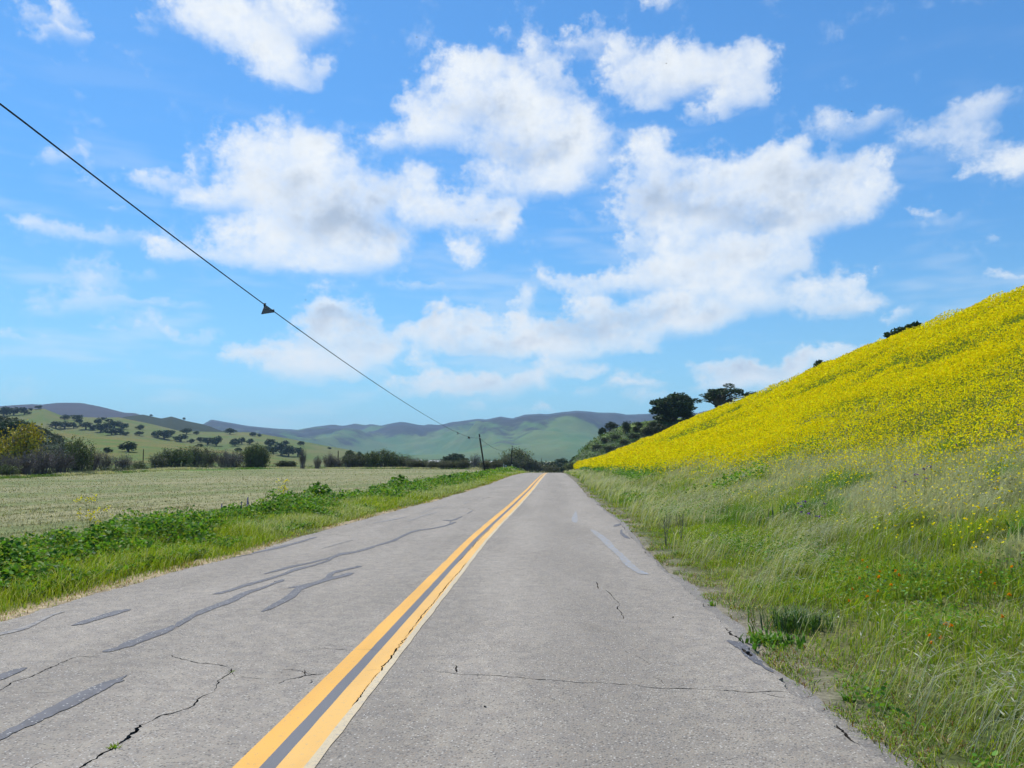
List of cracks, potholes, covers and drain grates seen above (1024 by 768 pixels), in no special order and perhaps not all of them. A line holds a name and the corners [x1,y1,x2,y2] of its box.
crack [82,655,233,767]
crack [431,654,790,698]
